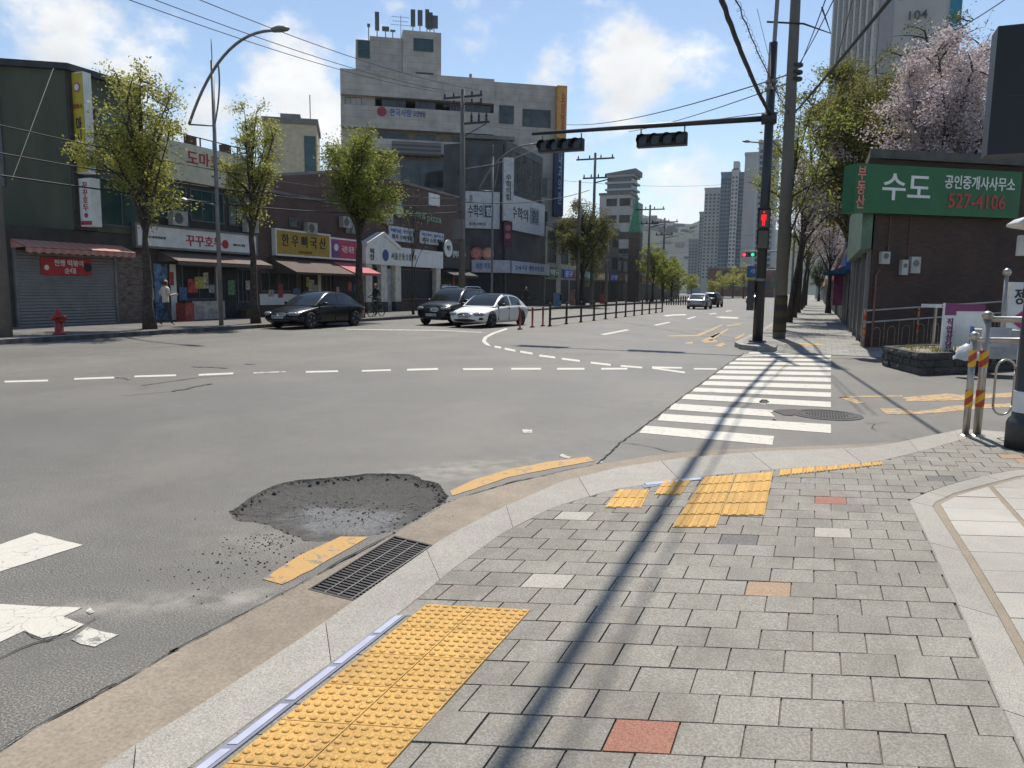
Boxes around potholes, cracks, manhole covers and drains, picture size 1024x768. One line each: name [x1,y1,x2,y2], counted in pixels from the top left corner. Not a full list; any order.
crack [115,366,224,396]
pothole [229,473,449,542]
manhole cover [772,409,864,421]
drain grate [308,536,432,601]
